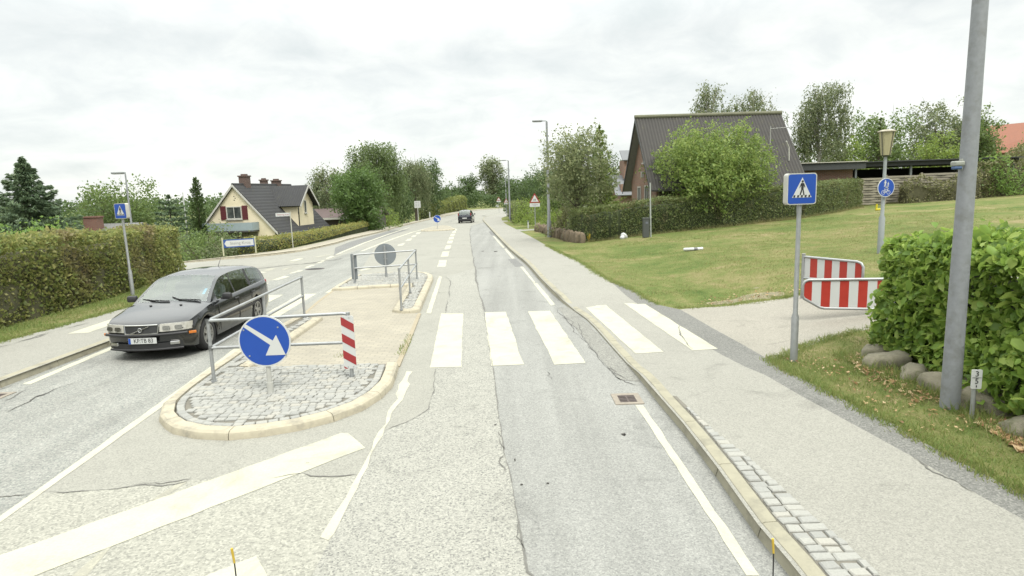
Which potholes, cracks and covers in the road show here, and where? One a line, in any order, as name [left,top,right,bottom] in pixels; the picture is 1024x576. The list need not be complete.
crack [2,383,72,410]
drain grate [610,393,645,405]
crack [557,307,634,385]
